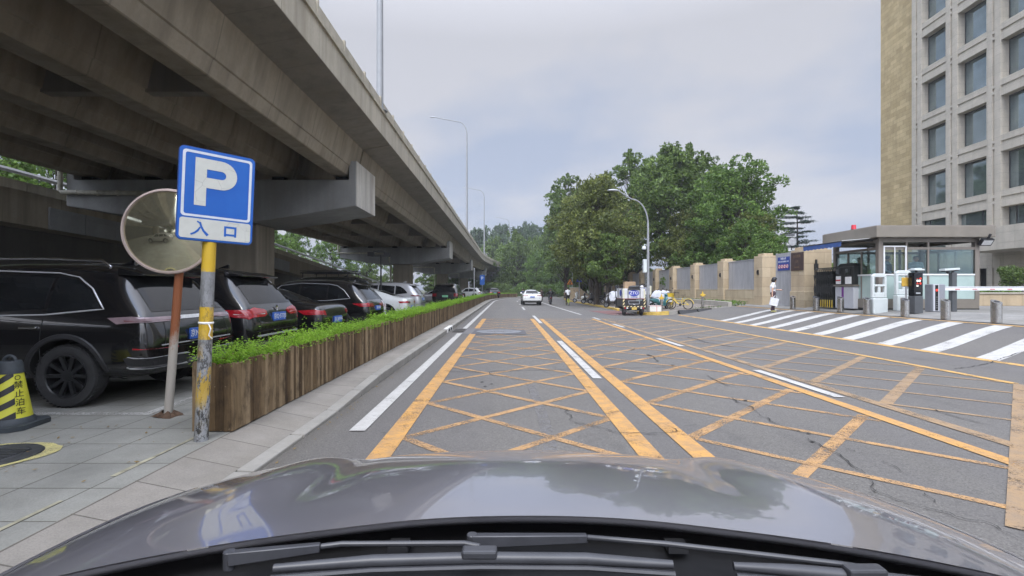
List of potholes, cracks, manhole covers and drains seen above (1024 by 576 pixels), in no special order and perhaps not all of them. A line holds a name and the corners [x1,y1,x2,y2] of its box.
crack [469,348,676,373]
manhole cover [0,442,63,467]
crack [709,376,1009,533]
